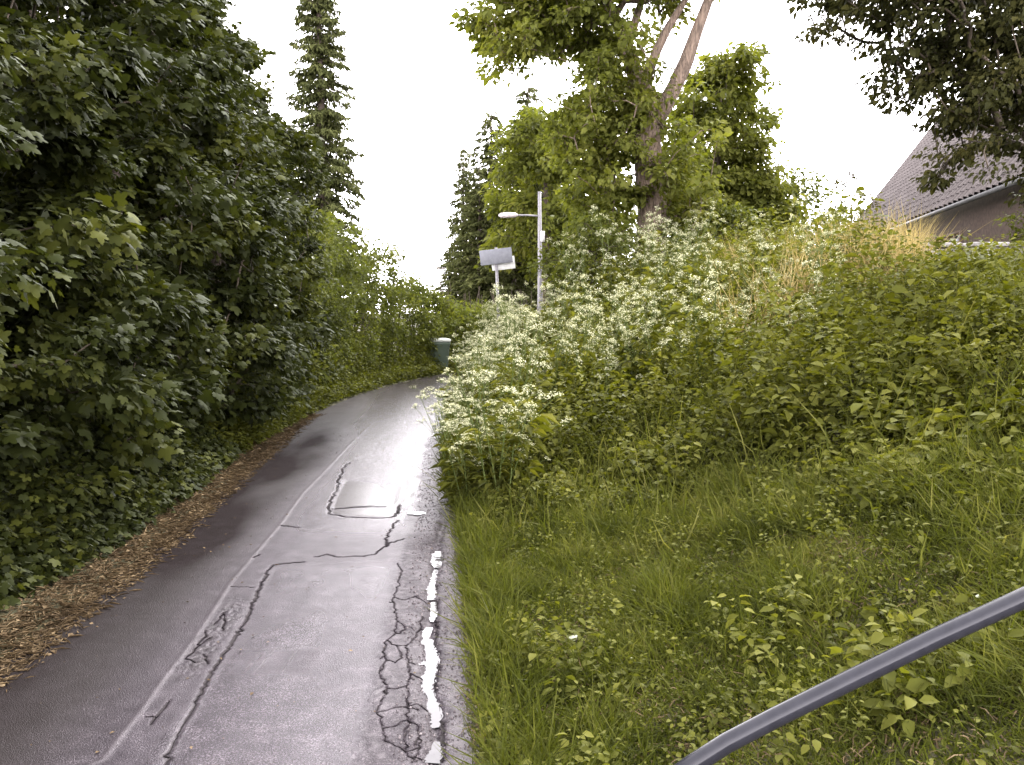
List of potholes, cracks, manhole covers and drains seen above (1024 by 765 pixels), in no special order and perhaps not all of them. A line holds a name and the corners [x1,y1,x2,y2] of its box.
crack [376,563,445,763]
crack [146,463,404,765]
